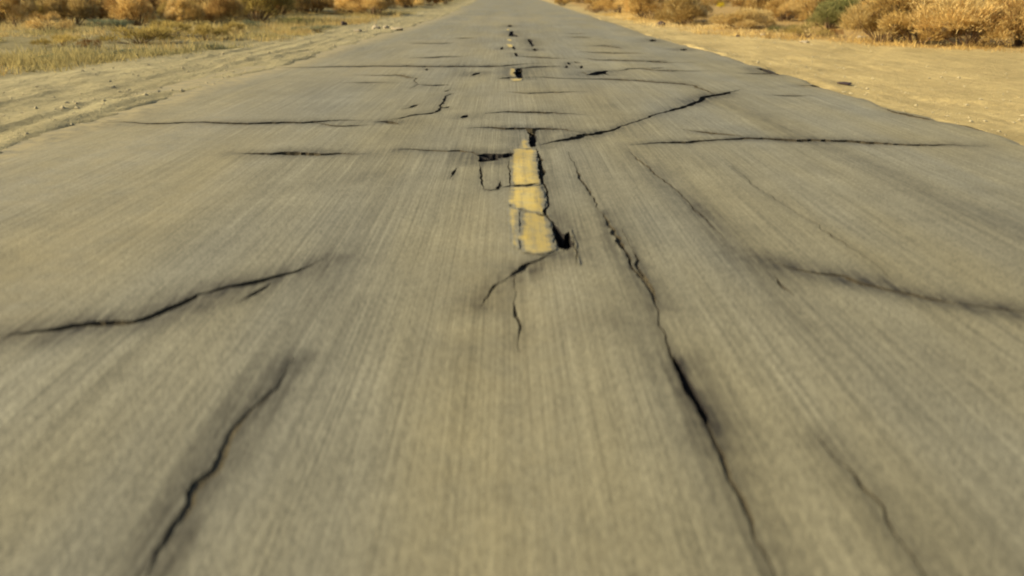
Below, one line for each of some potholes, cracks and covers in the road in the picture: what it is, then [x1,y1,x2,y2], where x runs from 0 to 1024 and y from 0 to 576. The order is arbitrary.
crack [4,259,322,336]
crack [127,33,983,576]
pothole [551,221,575,250]
